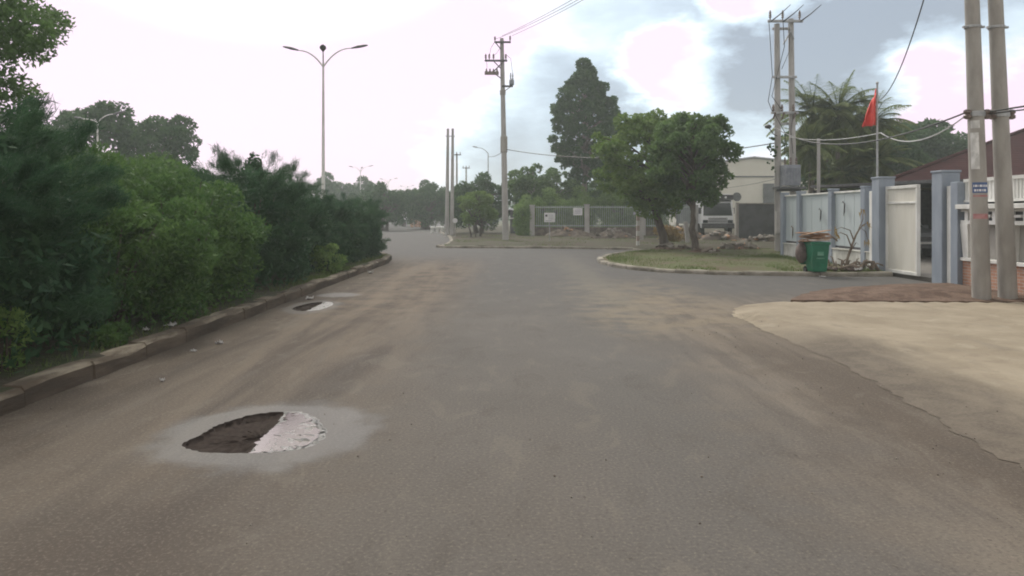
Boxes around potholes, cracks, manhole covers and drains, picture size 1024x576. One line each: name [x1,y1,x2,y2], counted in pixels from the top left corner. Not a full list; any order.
pothole [182,411,328,453]
pothole [293,302,333,311]
